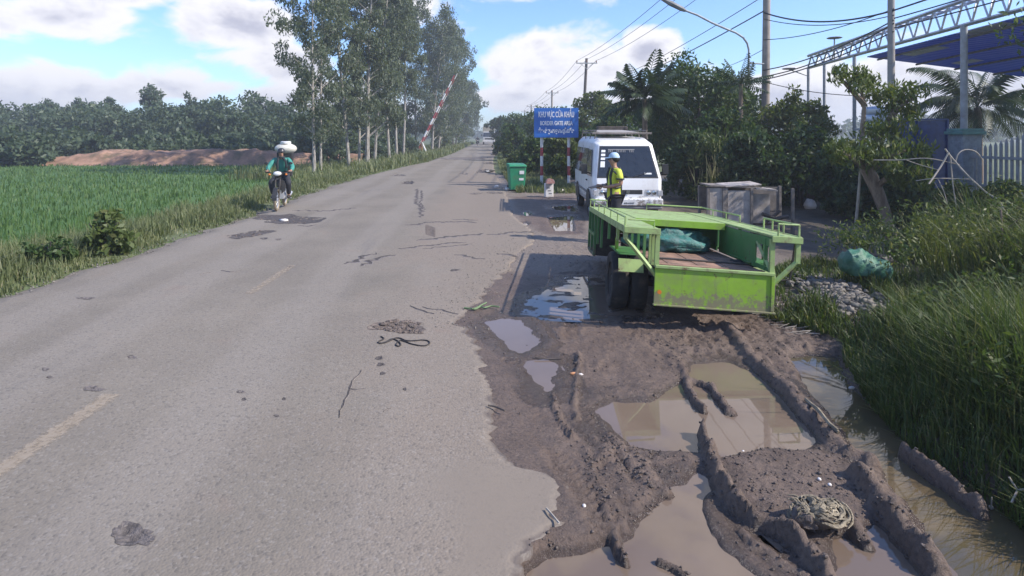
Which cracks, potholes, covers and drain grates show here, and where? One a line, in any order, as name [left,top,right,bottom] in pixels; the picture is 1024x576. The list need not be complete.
crack [339,370,366,417]
pothole [367,319,426,334]
pothole [111,521,155,546]
crack [344,189,532,266]
